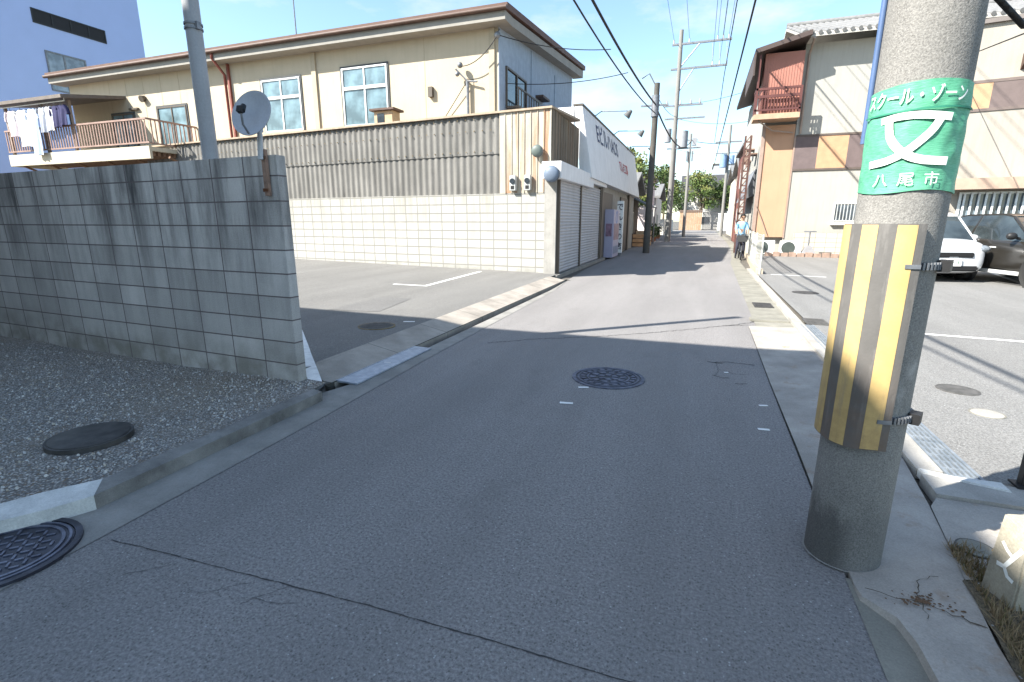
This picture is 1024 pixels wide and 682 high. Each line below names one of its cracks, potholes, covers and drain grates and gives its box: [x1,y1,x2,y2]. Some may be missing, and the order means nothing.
manhole cover [0,518,84,588]
manhole cover [968,408,1007,419]
manhole cover [42,422,135,456]
manhole cover [935,384,981,396]
manhole cover [572,367,645,389]
crack [866,576,987,628]
manhole cover [358,322,396,330]
crack [113,540,631,682]
